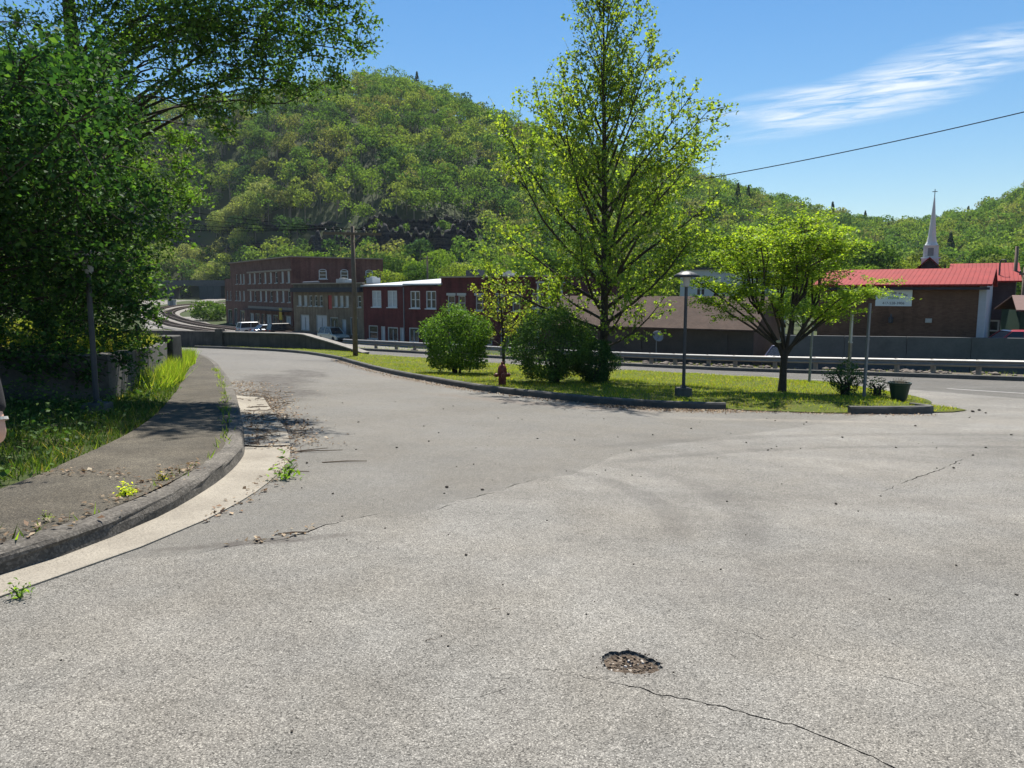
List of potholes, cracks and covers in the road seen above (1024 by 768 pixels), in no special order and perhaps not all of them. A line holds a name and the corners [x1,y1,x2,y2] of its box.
pothole [592,648,663,676]
crack [505,669,895,768]
